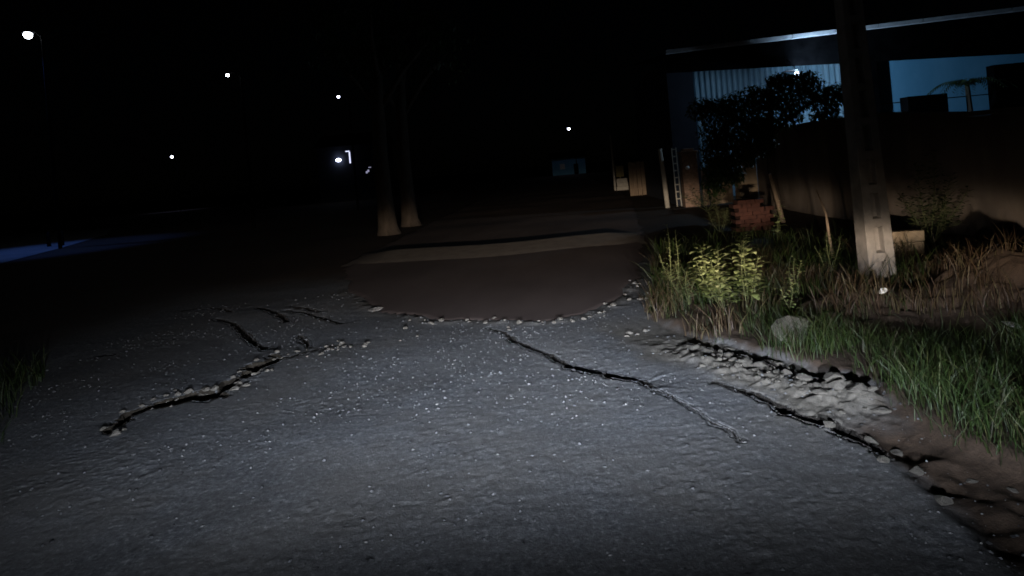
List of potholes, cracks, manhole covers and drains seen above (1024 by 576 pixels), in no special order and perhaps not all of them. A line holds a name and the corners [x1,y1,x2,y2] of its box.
crack [180,306,354,359]
crack [486,327,895,461]
